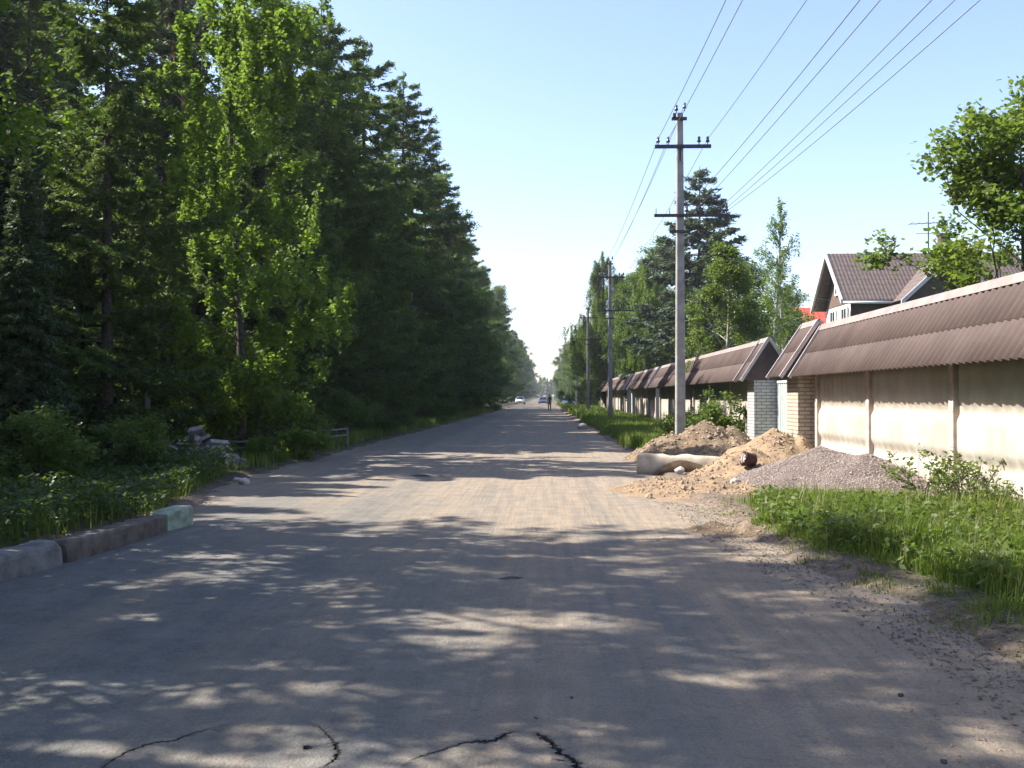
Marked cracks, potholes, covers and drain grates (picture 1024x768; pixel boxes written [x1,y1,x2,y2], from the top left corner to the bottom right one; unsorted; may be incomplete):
crack [102,729,207,768]
crack [415,732,511,759]
crack [319,727,341,767]
crack [537,733,582,768]
